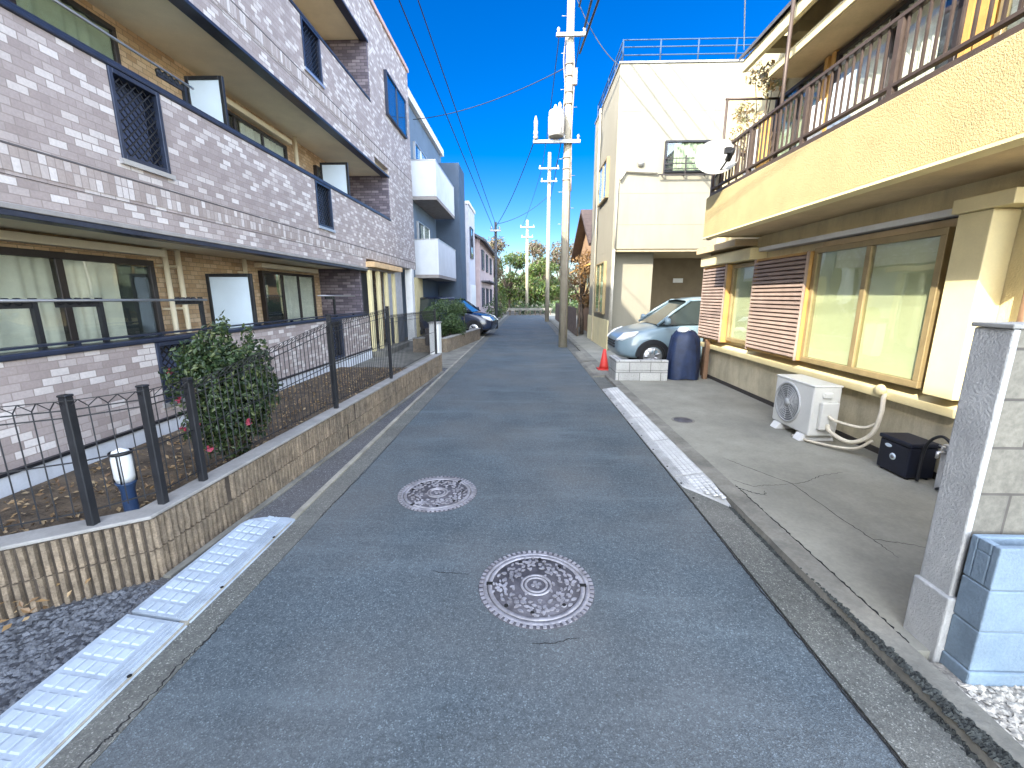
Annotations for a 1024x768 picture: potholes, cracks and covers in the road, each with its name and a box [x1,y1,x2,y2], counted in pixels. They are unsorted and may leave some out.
crack [78,619,224,768]
manhole cover [479,550,595,630]
manhole cover [397,476,477,513]
